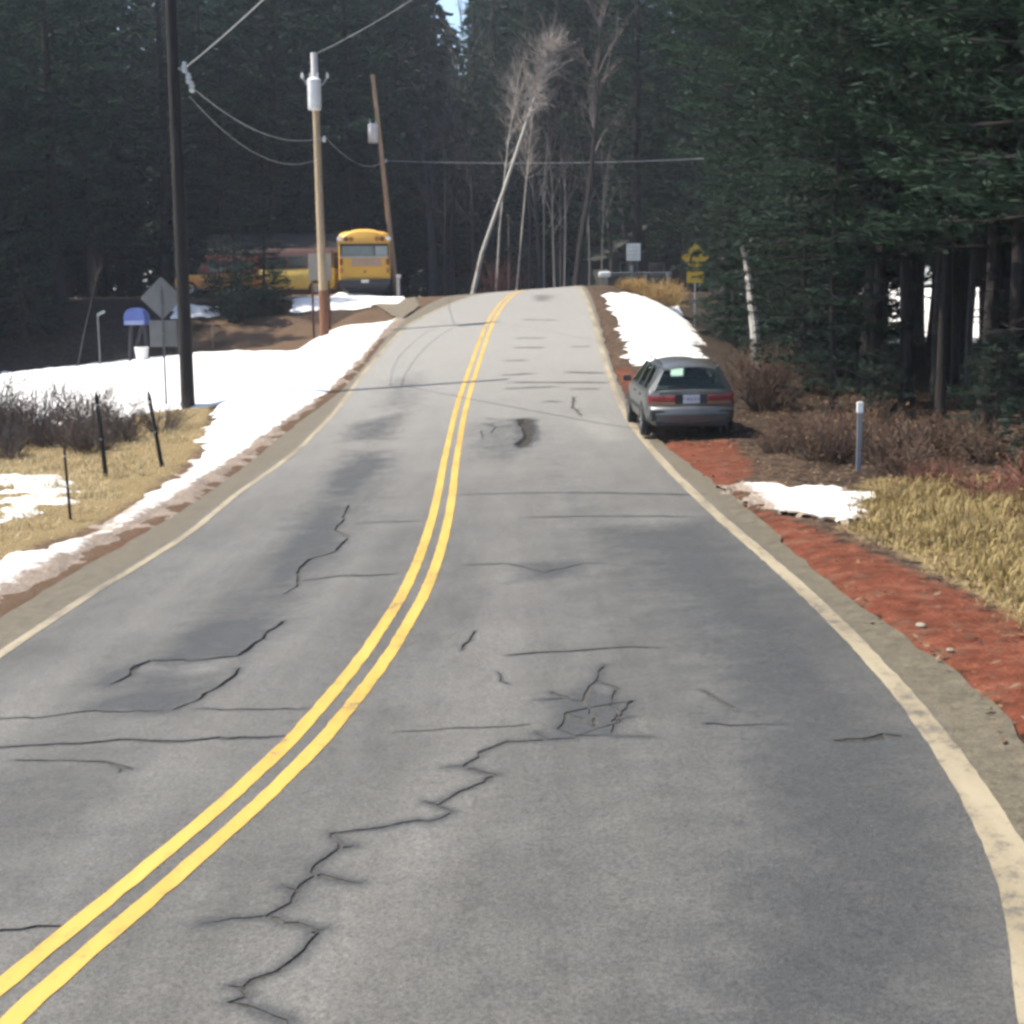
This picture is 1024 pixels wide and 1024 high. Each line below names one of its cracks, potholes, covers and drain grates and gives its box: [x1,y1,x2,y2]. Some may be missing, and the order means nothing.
crack [110,622,283,710]
pothole [514,419,536,448]
crack [0,736,283,772]
crack [285,506,391,594]
crack [208,647,649,1024]
crack [509,372,598,415]
crack [704,691,782,726]
crack [461,631,475,650]
crack [833,733,900,743]
